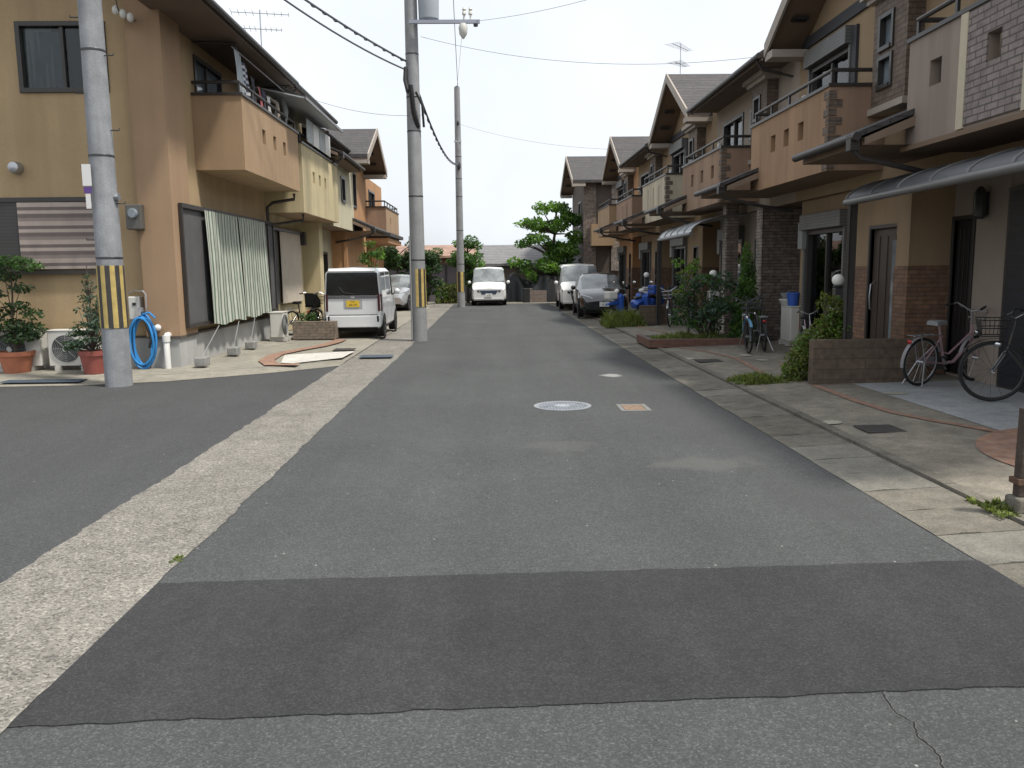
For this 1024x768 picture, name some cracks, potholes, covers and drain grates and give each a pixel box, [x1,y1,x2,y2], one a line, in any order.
crack [879,691,946,768]
manhole cover [534,401,591,411]
